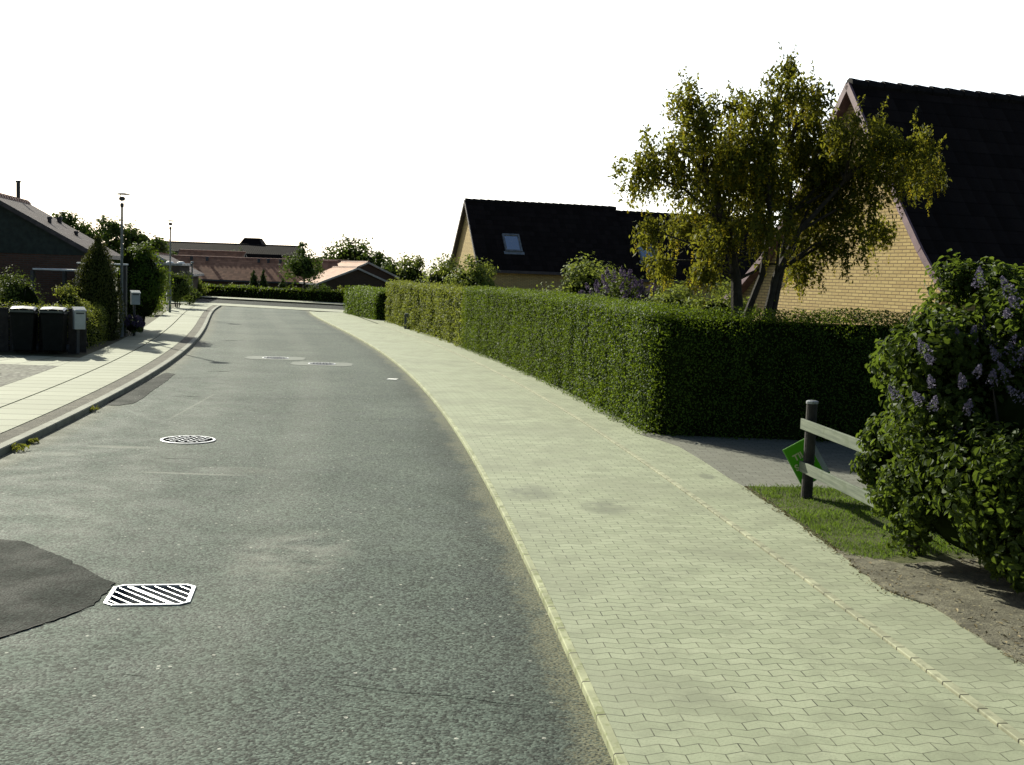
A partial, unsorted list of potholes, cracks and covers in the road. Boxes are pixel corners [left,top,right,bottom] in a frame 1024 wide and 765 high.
crack [329,683,541,706]
manhole cover [160,436,216,444]
drain grate [103,584,196,606]
